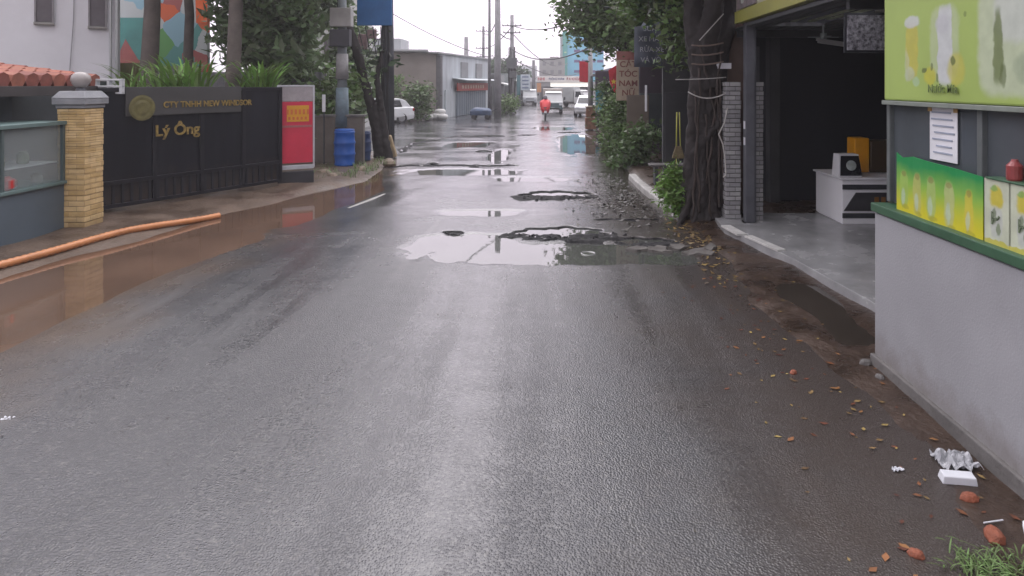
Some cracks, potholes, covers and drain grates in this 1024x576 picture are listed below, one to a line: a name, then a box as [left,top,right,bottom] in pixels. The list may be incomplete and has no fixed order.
pothole [511,190,600,201]
pothole [498,226,627,245]
pothole [612,237,681,247]
